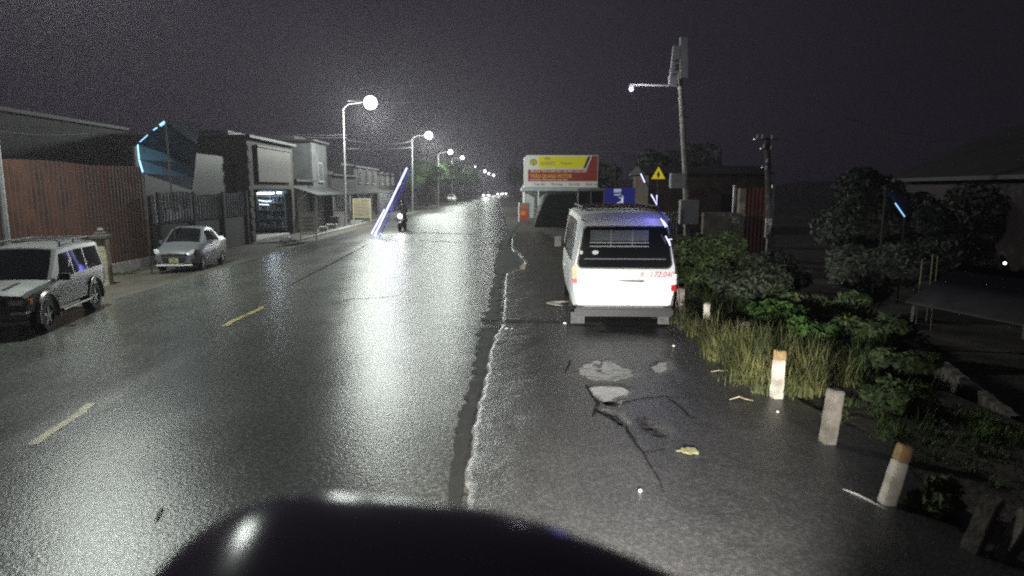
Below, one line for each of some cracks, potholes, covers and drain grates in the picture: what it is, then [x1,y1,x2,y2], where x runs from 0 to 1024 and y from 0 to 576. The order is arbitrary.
crack [565,359,693,492]
